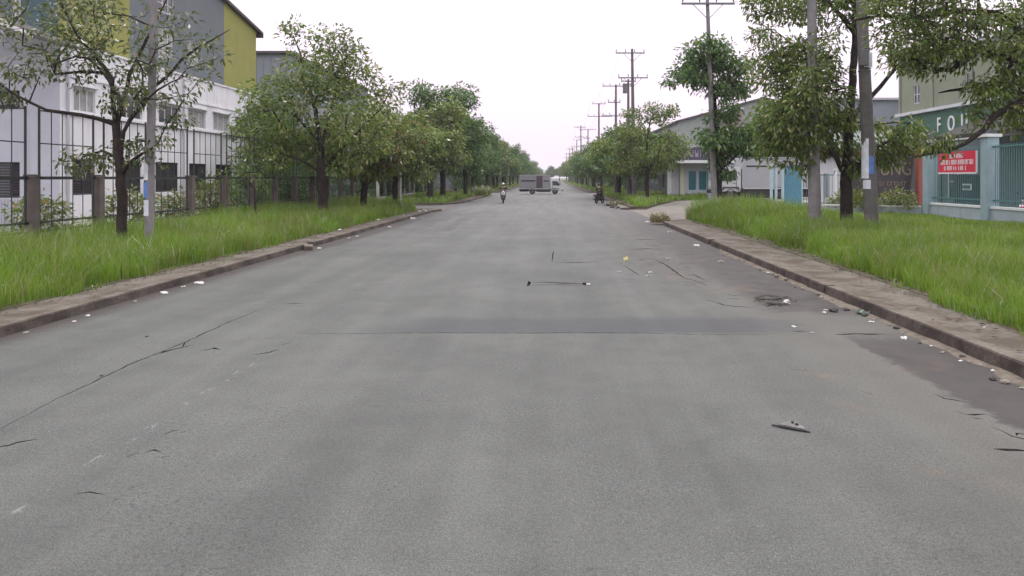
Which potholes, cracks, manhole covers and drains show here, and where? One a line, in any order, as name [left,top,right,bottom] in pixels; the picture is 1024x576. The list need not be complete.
crack [625,257,741,307]
crack [938,395,1024,451]
crack [2,306,268,428]
pothole [753,294,797,307]
